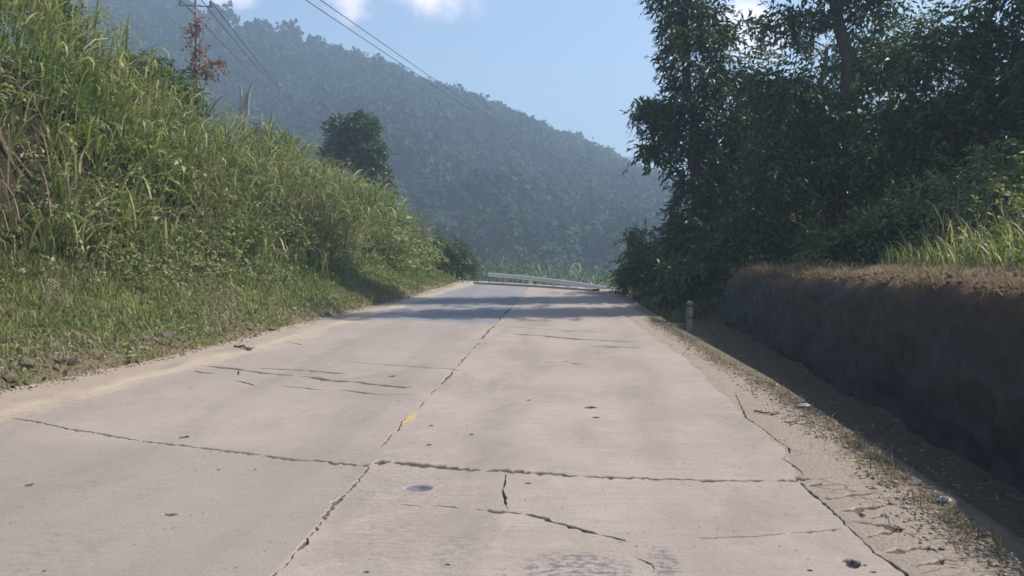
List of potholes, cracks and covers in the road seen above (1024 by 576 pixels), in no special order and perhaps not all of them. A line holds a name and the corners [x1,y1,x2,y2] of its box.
crack [192,365,411,395]
crack [492,333,662,369]
crack [698,528,844,539]
pothole [836,558,862,569]
crack [403,474,655,570]
